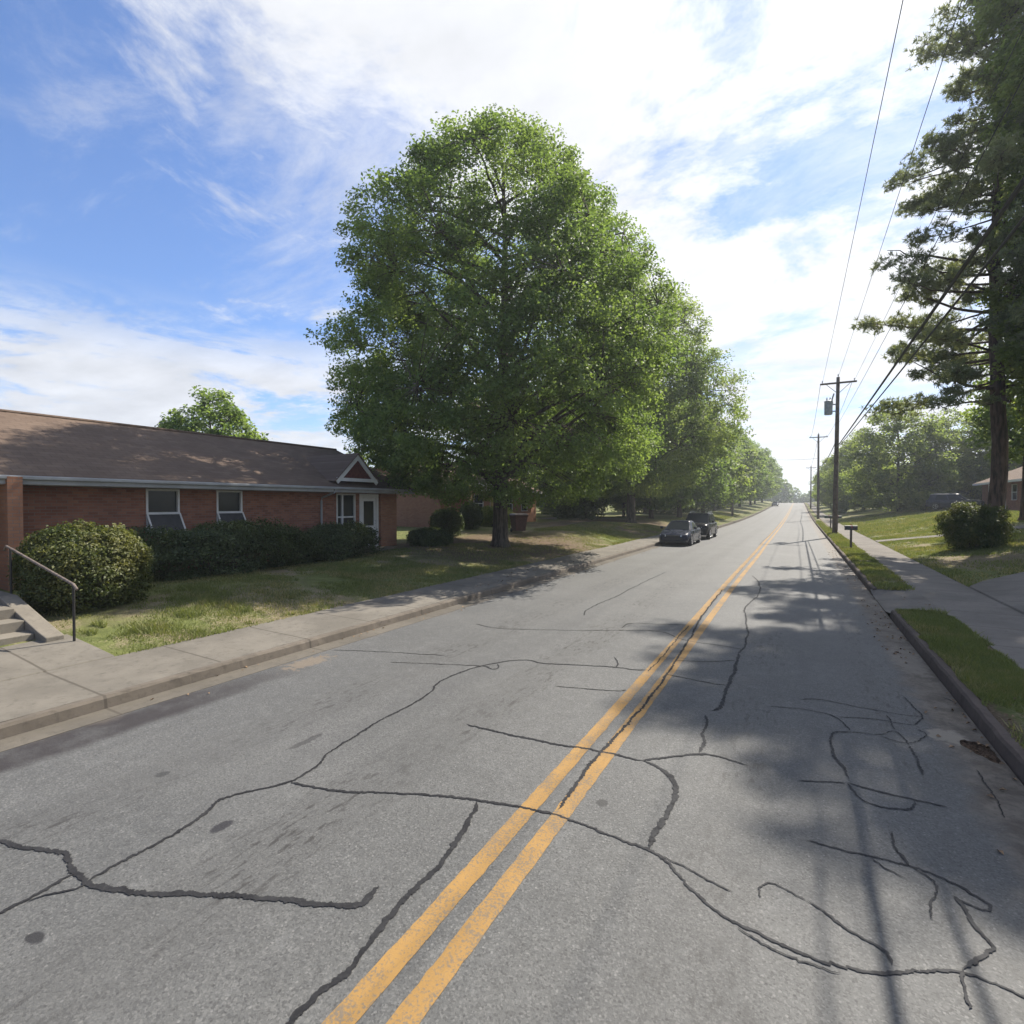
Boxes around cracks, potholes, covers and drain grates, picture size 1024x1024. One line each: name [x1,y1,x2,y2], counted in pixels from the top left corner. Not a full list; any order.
crack [772,696,927,778]
crack [977,770,1005,817]
pothole [960,740,1001,764]
crack [348,650,490,667]
crack [479,577,761,753]
crack [758,882,893,964]
